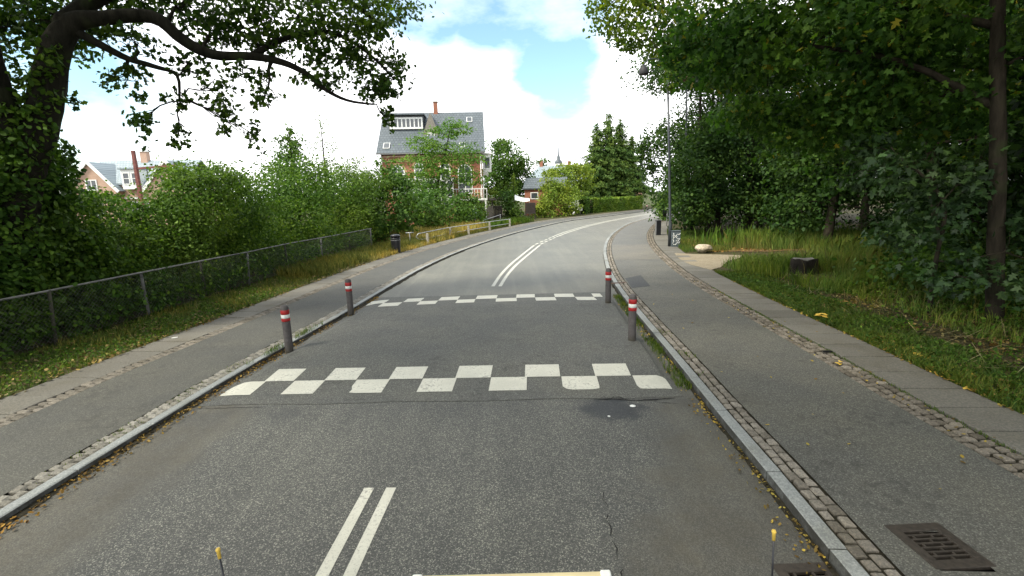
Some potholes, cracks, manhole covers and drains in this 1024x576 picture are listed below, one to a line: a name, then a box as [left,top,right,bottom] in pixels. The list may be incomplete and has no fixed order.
drain grate [771,562,833,576]
drain grate [884,522,996,572]
